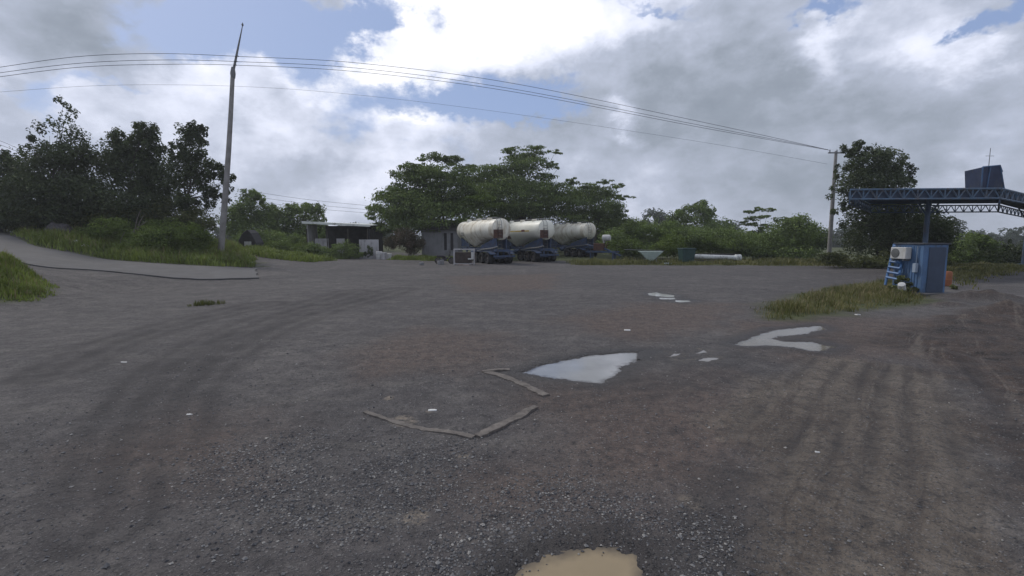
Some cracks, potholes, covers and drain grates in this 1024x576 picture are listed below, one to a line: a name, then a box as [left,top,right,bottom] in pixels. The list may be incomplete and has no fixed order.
pothole [713,323,858,356]
pothole [637,291,704,304]
pothole [448,515,704,576]
pothole [501,347,673,391]
